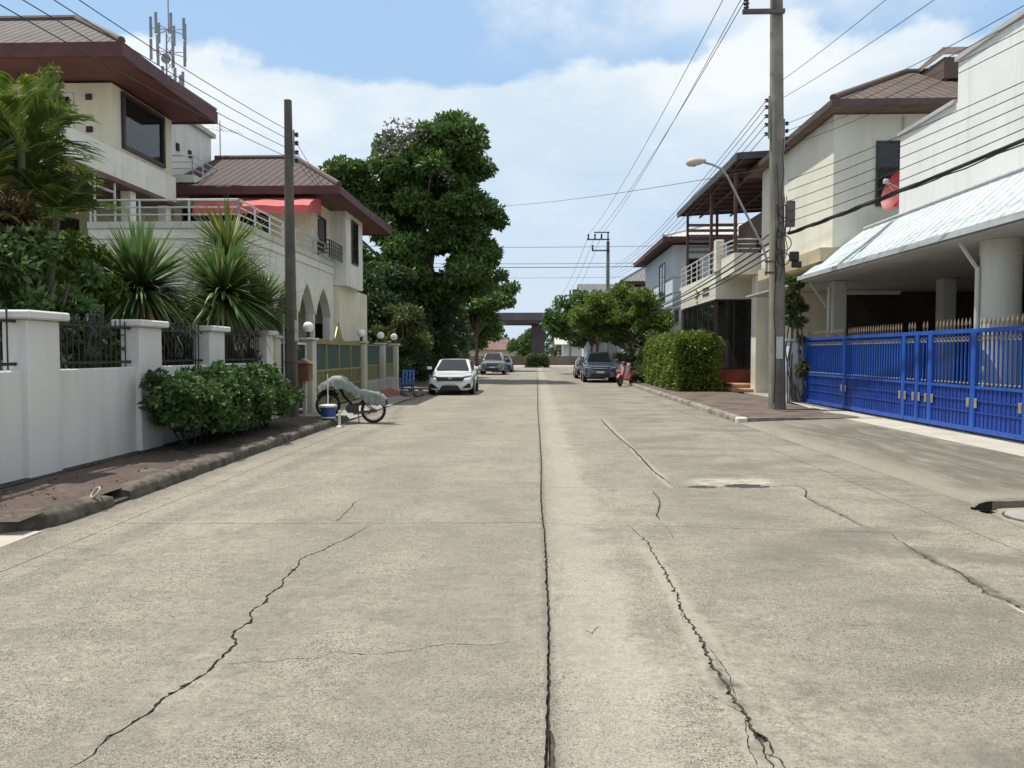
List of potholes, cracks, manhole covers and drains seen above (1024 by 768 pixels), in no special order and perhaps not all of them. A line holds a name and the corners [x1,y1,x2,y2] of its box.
crack [71,497,525,768]
crack [780,486,1024,611]
manhole cover [991,508,1024,529]
drain grate [971,498,1024,514]
crack [602,420,786,768]
